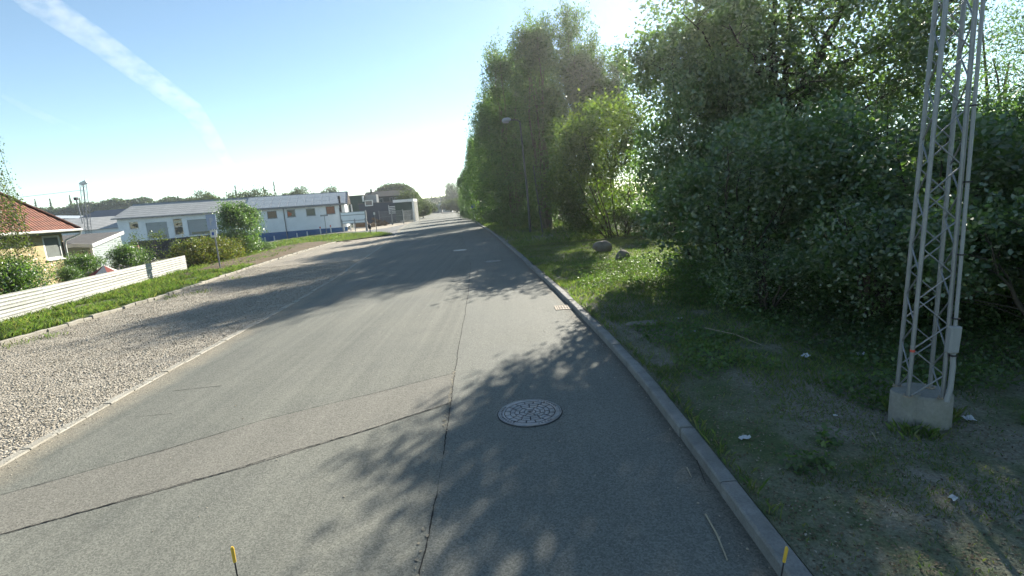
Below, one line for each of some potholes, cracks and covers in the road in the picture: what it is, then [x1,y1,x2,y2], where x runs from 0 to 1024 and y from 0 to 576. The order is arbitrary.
manhole cover [497,399,563,427]
